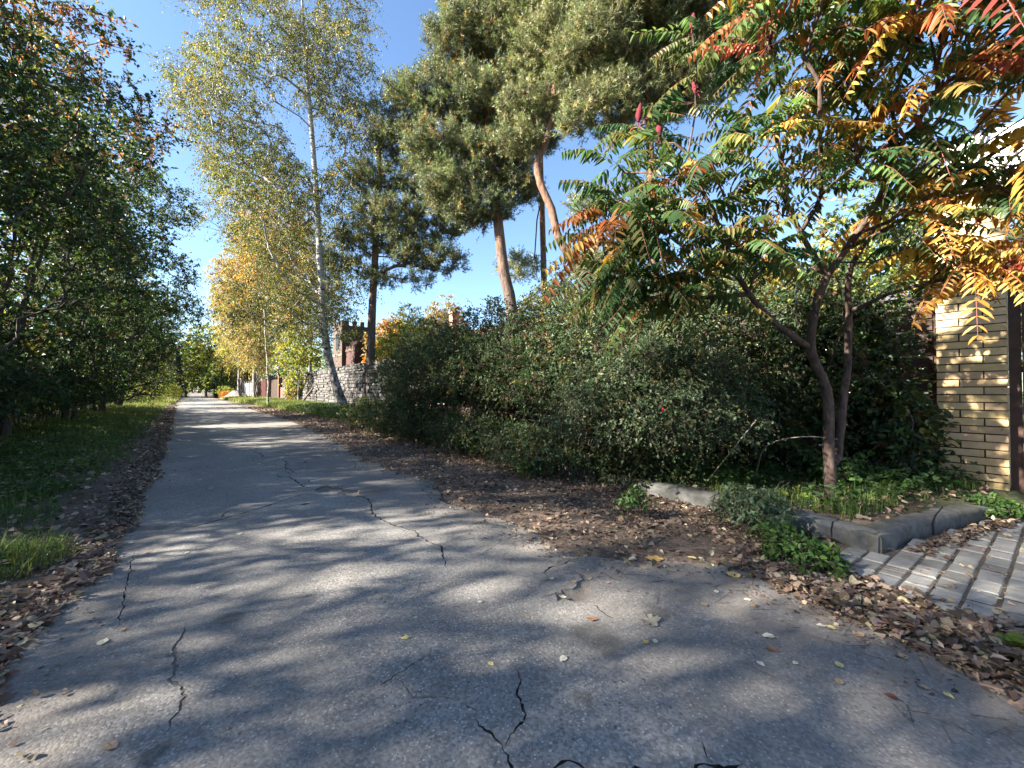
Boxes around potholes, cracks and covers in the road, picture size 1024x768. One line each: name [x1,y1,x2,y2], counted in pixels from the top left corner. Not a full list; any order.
crack [156,451,316,533]
crack [359,652,527,768]
crack [113,555,134,633]
crack [166,623,189,733]
pothole [315,486,361,497]
